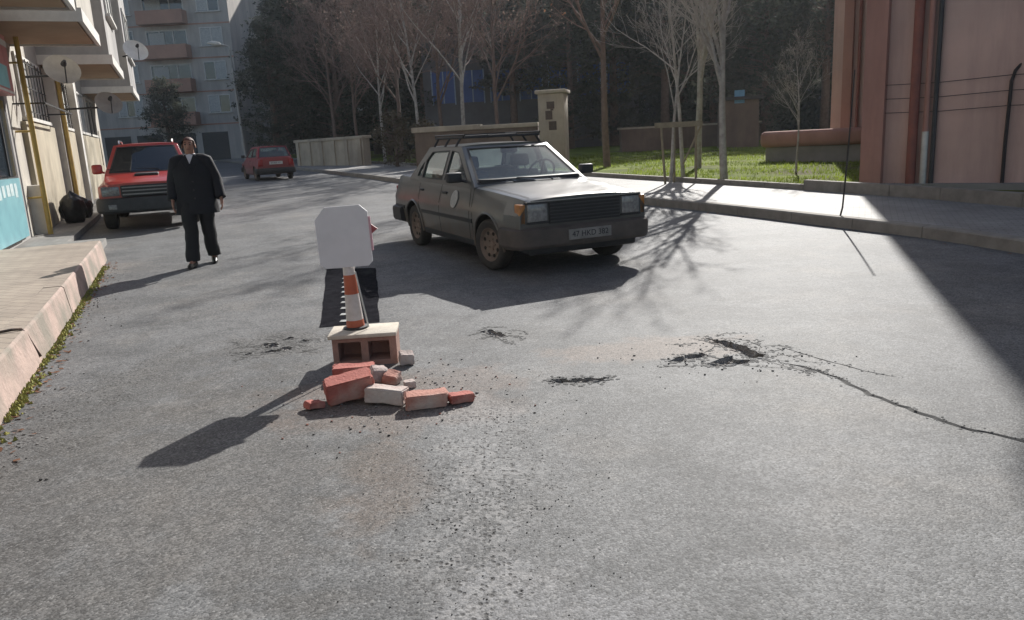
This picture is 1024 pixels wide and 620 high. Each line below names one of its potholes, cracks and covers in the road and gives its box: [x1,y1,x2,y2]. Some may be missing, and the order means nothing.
pothole [701,354,759,369]
pothole [542,375,620,386]
pothole [697,335,775,361]
pothole [661,352,716,364]
crack [657,332,1024,443]
pothole [477,329,513,339]
pothole [241,335,316,356]
